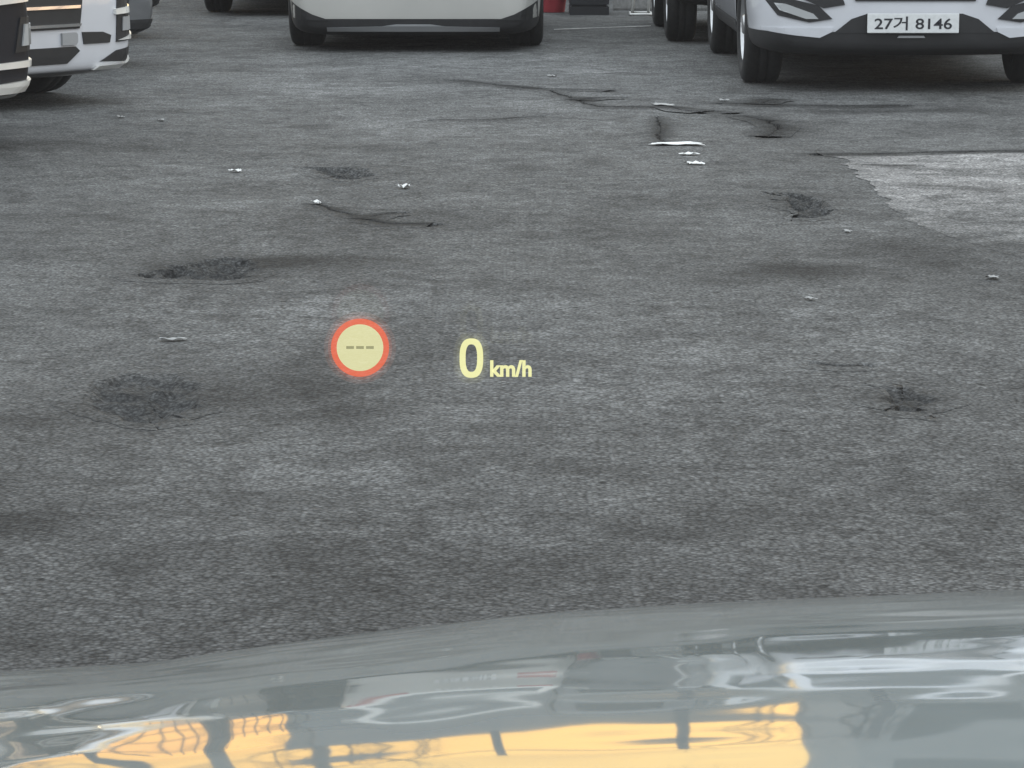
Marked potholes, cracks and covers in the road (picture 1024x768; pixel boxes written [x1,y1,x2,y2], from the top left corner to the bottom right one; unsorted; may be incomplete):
pothole [849,381,972,421]
pothole [292,165,390,182]
pothole [49,369,230,431]
pothole [110,254,284,284]
crack [433,80,903,145]
pothole [763,191,852,221]
crack [295,203,433,227]
